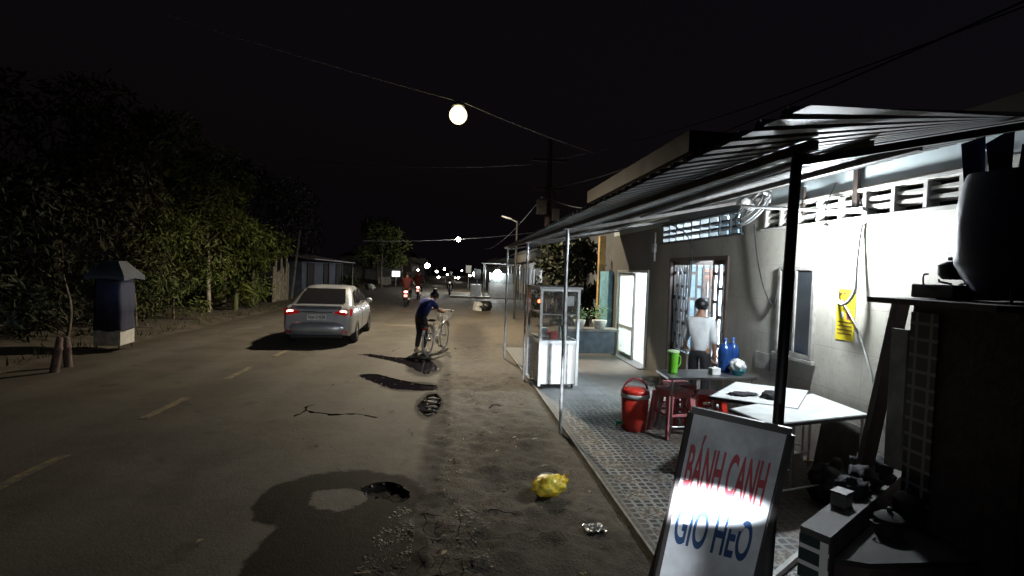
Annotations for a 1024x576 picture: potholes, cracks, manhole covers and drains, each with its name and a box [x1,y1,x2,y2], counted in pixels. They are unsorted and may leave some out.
pothole [359,482,410,503]
crack [416,507,515,576]
pothole [417,393,441,417]
crack [293,405,378,418]
pothole [359,374,438,391]
